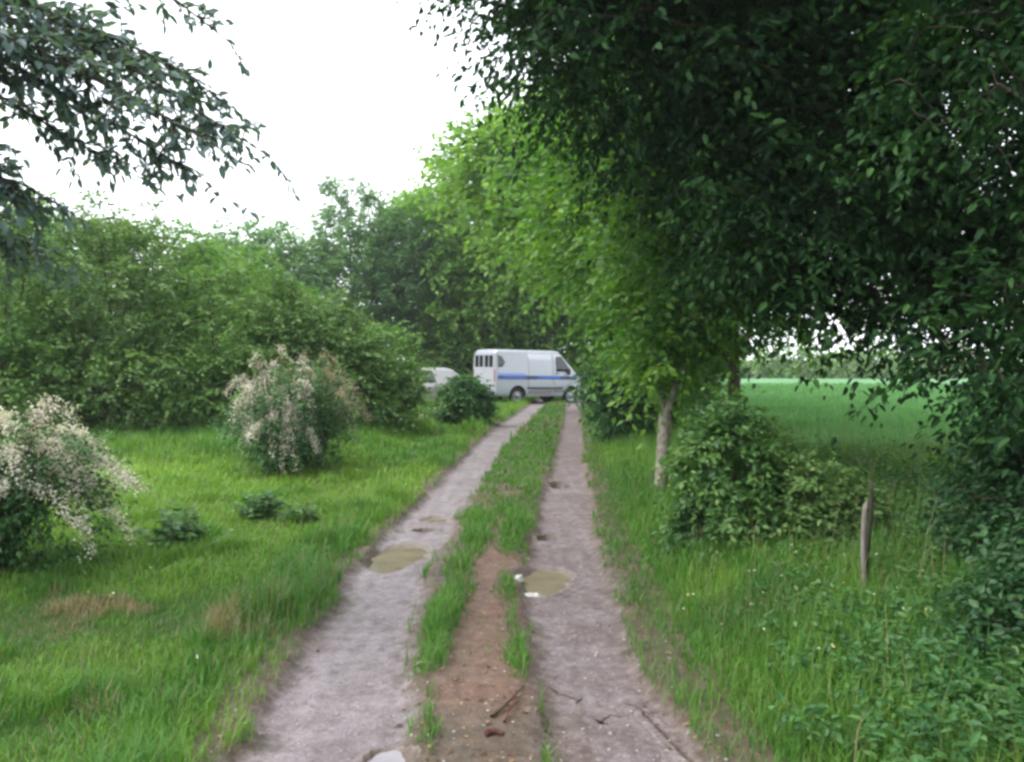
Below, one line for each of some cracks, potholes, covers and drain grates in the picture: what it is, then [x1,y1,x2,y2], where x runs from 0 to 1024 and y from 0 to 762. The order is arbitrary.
pothole [532,533,563,544]
pothole [413,516,454,525]
pothole [347,539,443,582]
pothole [494,562,589,605]
pothole [406,527,443,535]
pothole [541,479,577,491]
pothole [352,736,433,762]
crack [545,689,707,762]
